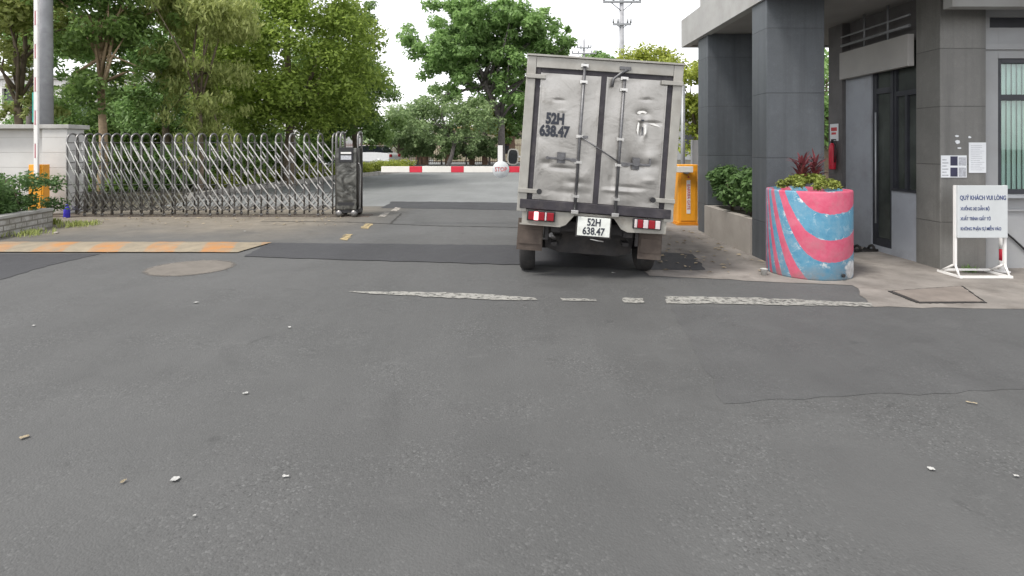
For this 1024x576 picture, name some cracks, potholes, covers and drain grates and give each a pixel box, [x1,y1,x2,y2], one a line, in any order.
manhole cover [888,286,987,304]
manhole cover [144,260,234,276]
